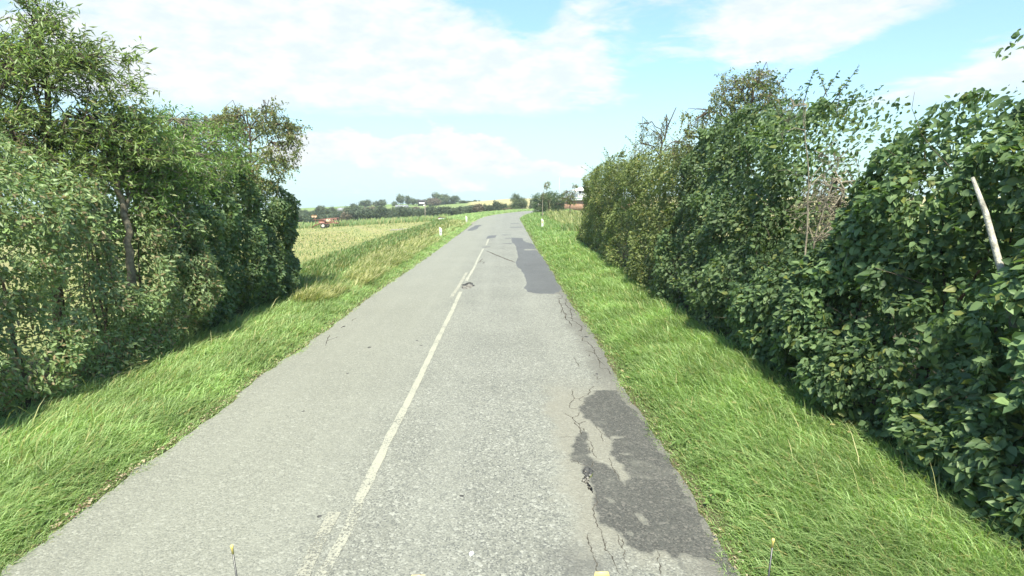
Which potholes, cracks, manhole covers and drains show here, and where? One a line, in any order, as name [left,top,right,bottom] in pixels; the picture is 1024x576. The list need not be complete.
crack [587,494,628,574]
crack [558,296,620,480]
pothole [582,467,593,493]
